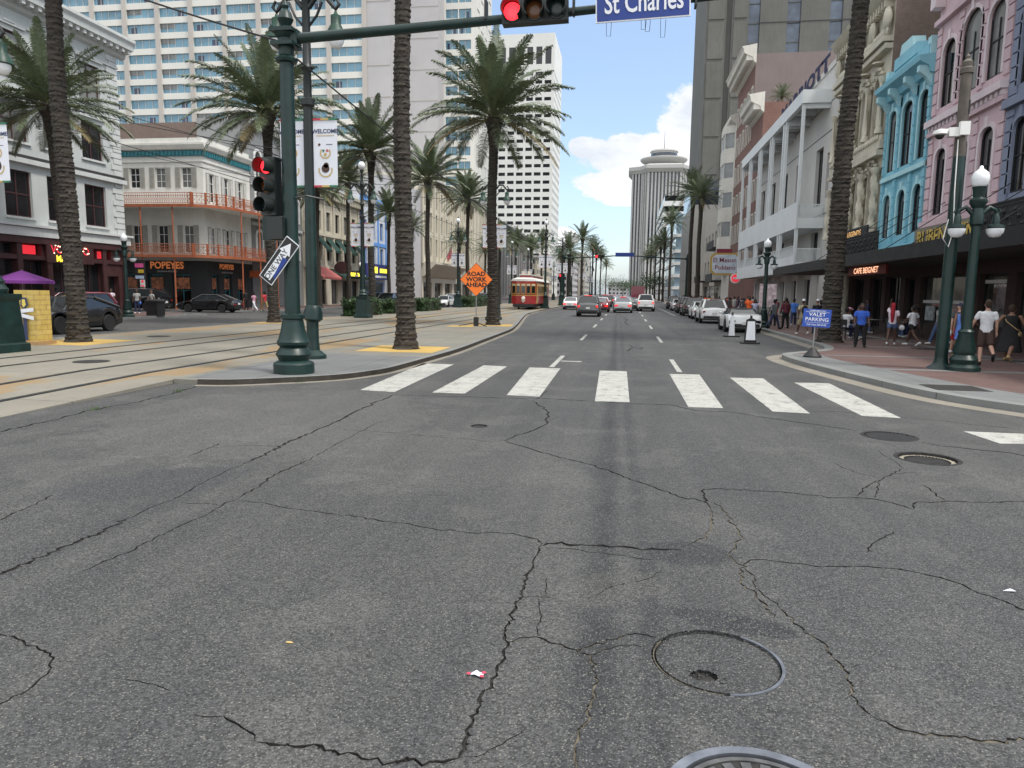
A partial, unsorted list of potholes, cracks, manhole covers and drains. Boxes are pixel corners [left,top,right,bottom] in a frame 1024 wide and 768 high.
manhole cover [893,452,963,466]
manhole cover [651,630,786,696]
pothole [681,665,727,685]
manhole cover [860,431,919,442]
manhole cover [671,746,814,768]
crack [0,391,1024,768]
